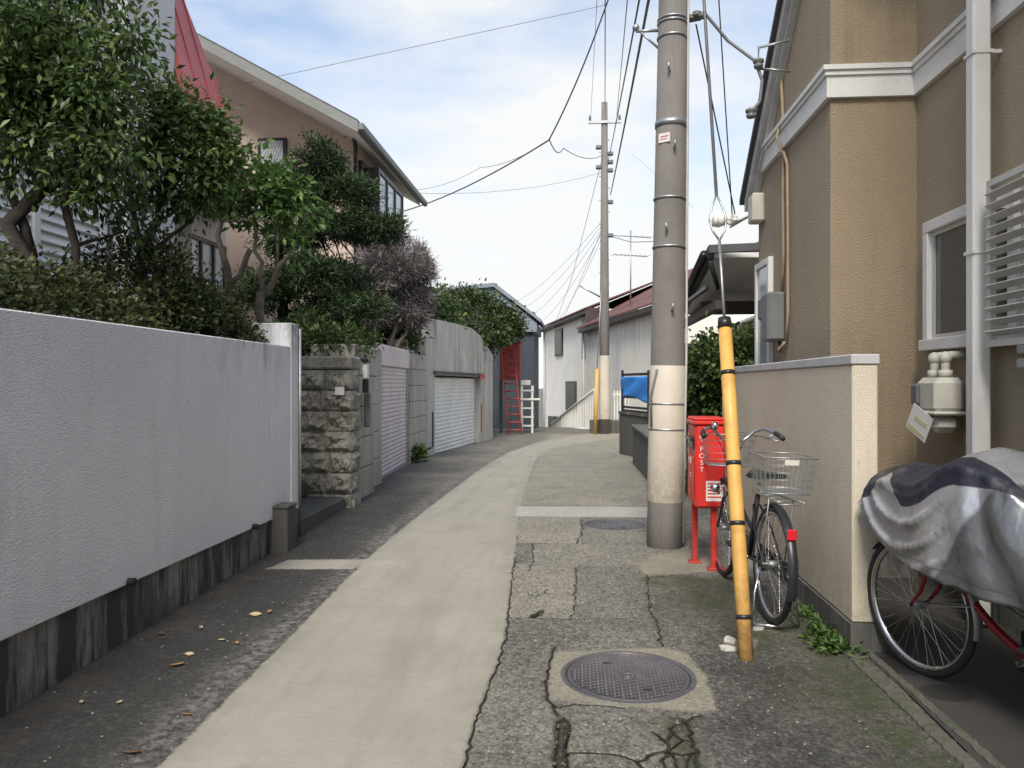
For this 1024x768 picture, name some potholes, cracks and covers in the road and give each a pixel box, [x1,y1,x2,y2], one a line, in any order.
crack [462,518,664,768]
crack [543,647,702,768]
manhole cover [582,519,647,530]
manhole cover [560,651,697,704]
